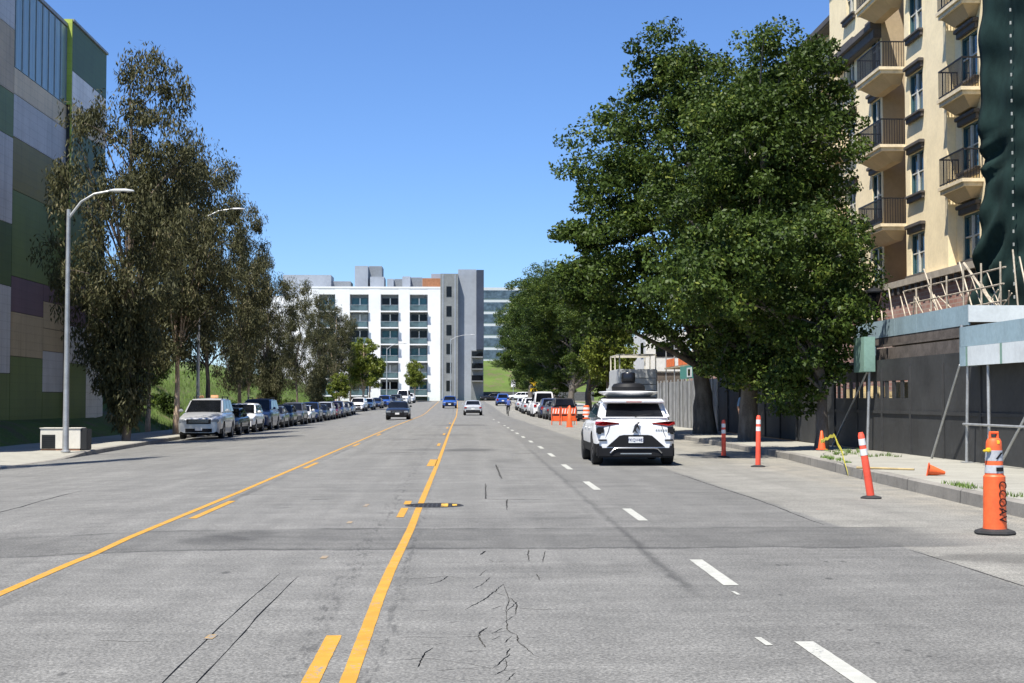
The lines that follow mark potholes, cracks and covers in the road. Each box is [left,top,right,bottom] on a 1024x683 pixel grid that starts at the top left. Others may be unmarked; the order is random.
crack [485,465,527,510]
crack [390,570,547,681]
